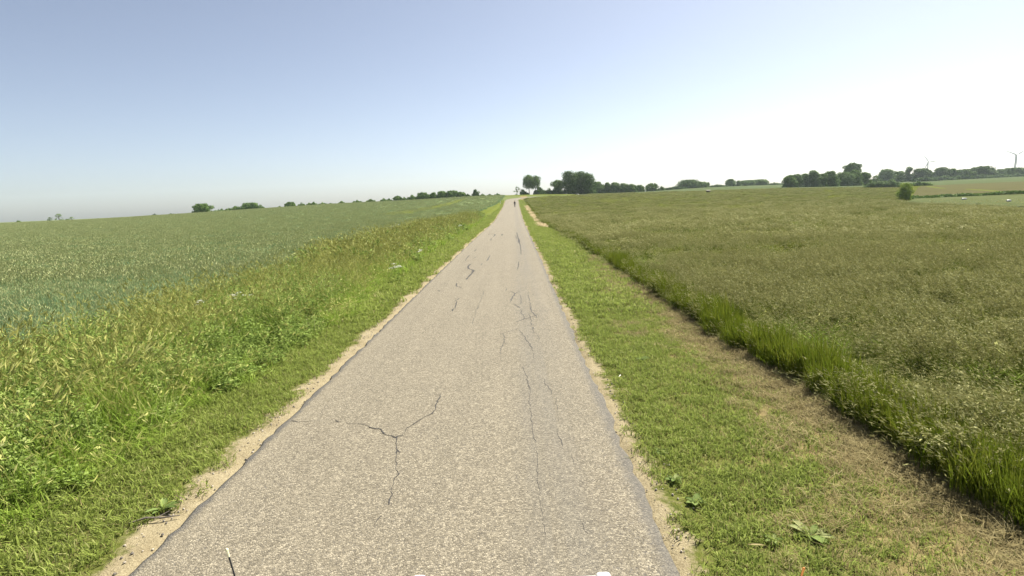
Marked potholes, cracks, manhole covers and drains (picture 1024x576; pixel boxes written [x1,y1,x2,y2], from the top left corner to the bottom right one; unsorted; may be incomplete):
crack [291,394,441,526]
crack [500,289,587,533]
crack [438,232,522,325]
